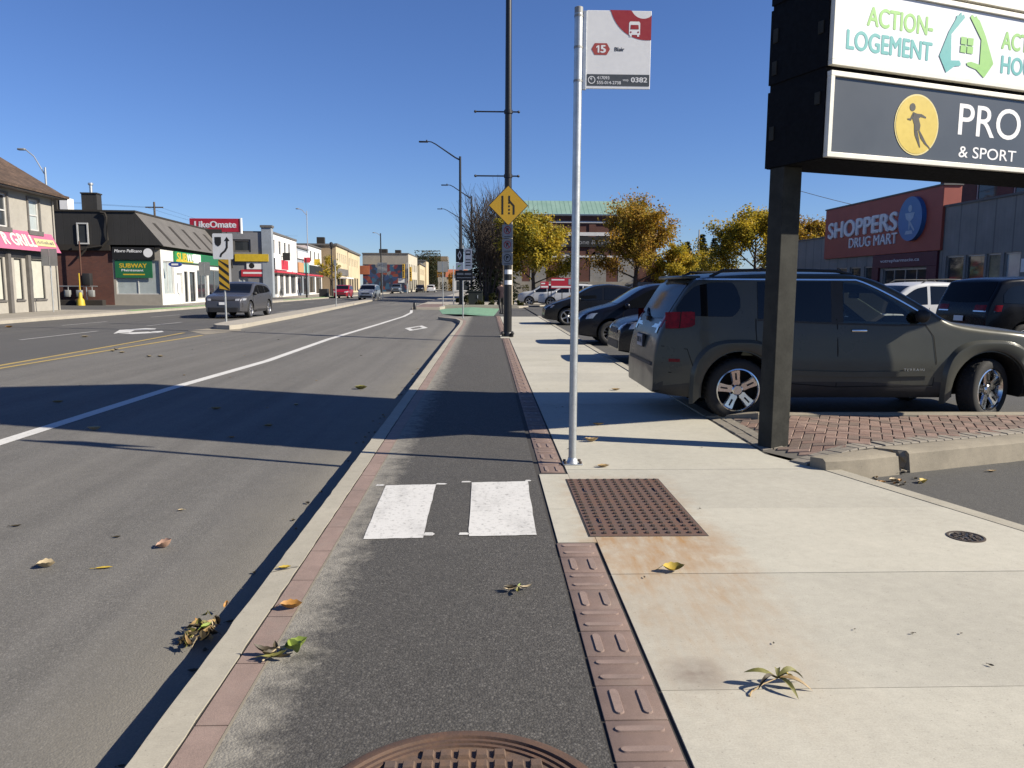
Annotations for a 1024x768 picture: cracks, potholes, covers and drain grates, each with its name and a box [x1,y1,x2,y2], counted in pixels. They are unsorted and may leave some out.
manhole cover [342,731,588,768]
utility cover [946,531,986,543]
